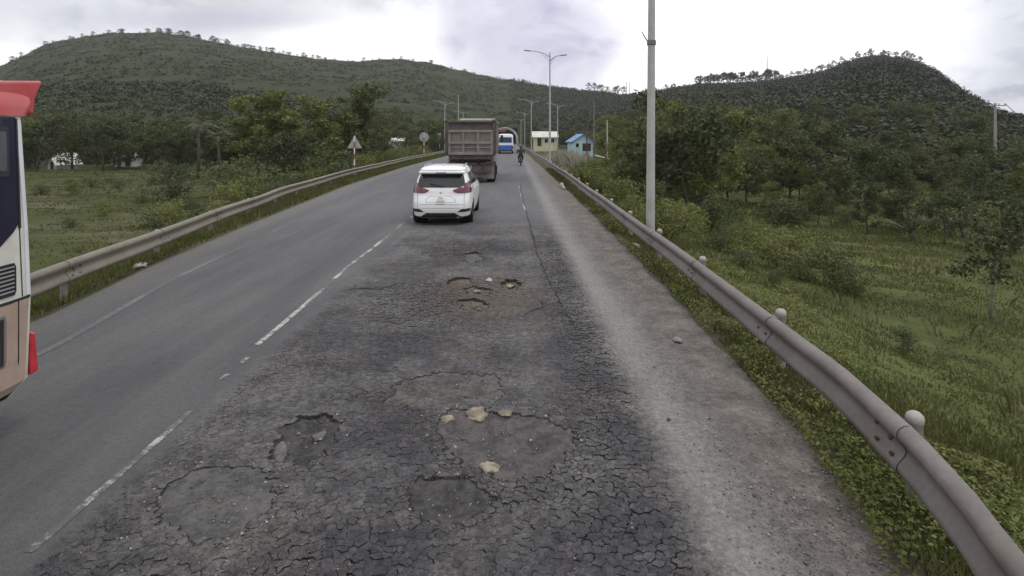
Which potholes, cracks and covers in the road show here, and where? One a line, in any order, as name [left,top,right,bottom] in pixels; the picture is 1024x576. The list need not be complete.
crack [33,187,729,576]
pothole [461,251,484,263]
pothole [500,279,523,290]
pothole [446,277,473,289]
pothole [434,408,579,484]
pothole [456,298,490,313]
pothole [406,473,499,526]
pothole [266,412,343,466]
